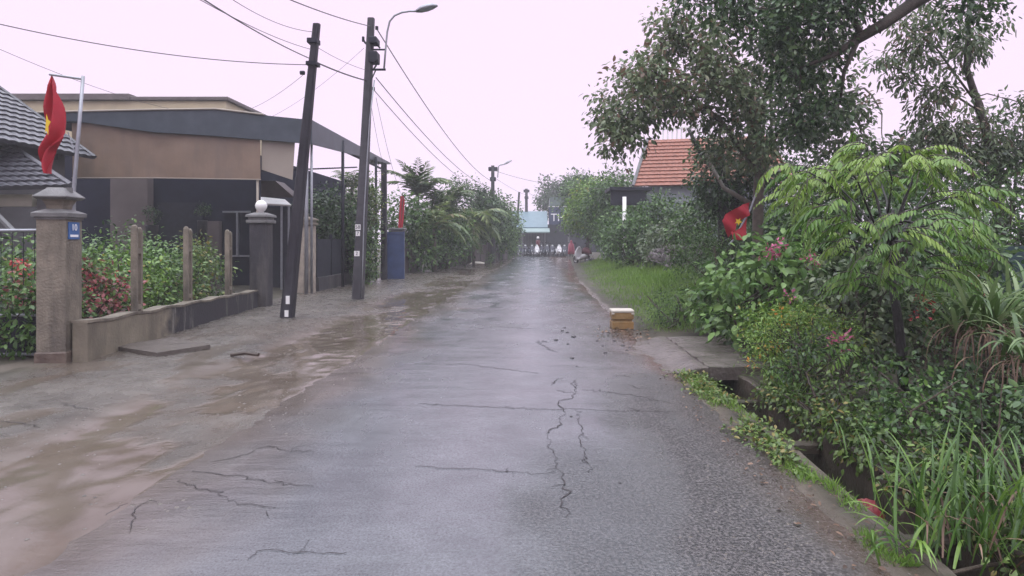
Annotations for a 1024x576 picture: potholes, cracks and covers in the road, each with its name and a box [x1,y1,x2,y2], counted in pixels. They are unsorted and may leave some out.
crack [177,446,314,517]
crack [418,364,676,515]
crack [248,540,346,559]
